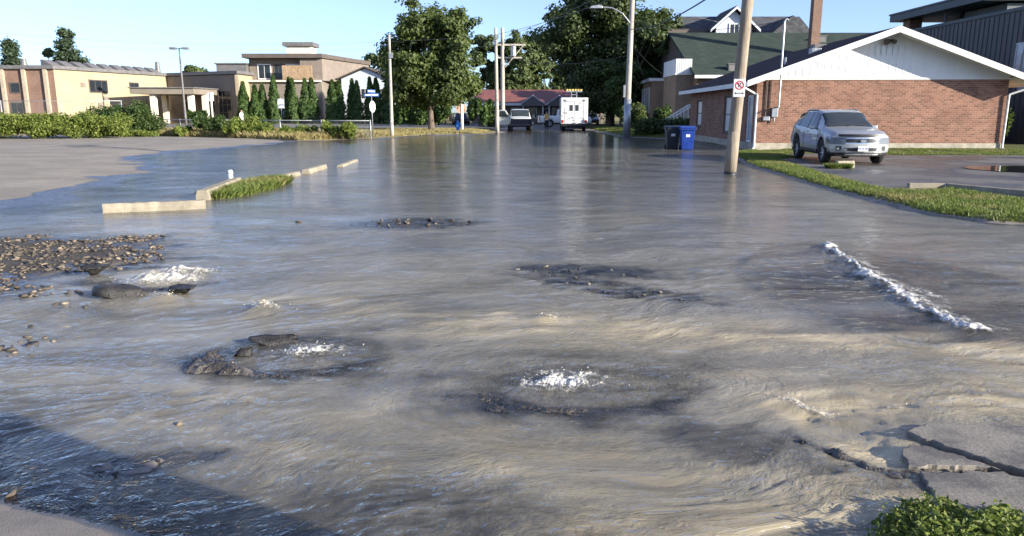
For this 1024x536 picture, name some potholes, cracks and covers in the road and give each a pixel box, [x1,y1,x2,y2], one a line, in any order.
pothole [430,357,712,436]
pothole [176,335,401,387]
crack [901,468,988,483]
